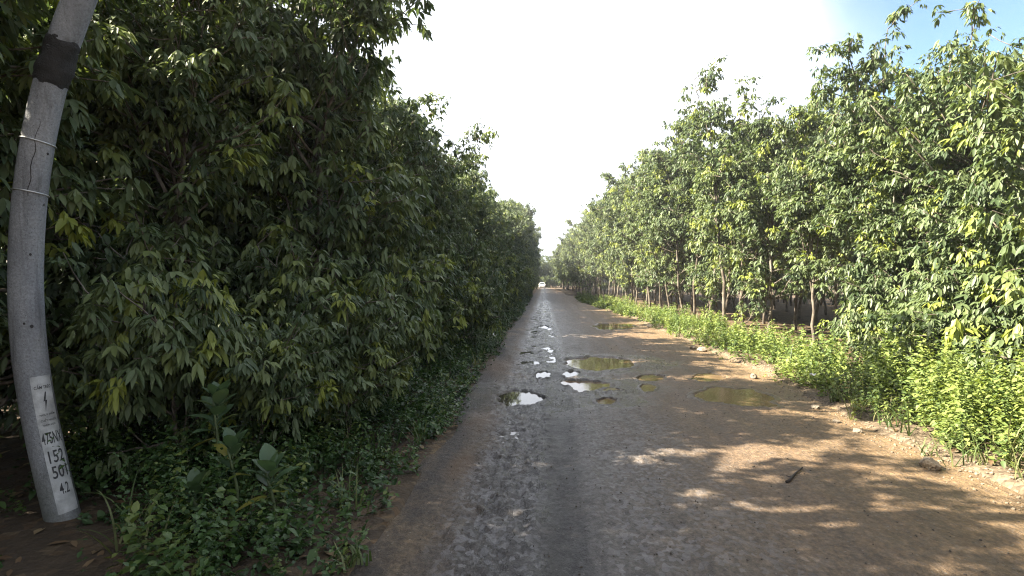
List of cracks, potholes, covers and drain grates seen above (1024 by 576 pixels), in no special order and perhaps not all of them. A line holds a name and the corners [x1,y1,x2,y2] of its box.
pothole [559,369,582,381]
pothole [689,372,731,383]
pothole [592,396,622,406]
pothole [636,383,660,393]
pothole [557,354,640,372]
pothole [686,386,785,409]
pothole [531,370,553,380]
pothole [491,388,551,408]
pothole [556,377,616,394]
pothole [632,373,669,382]
